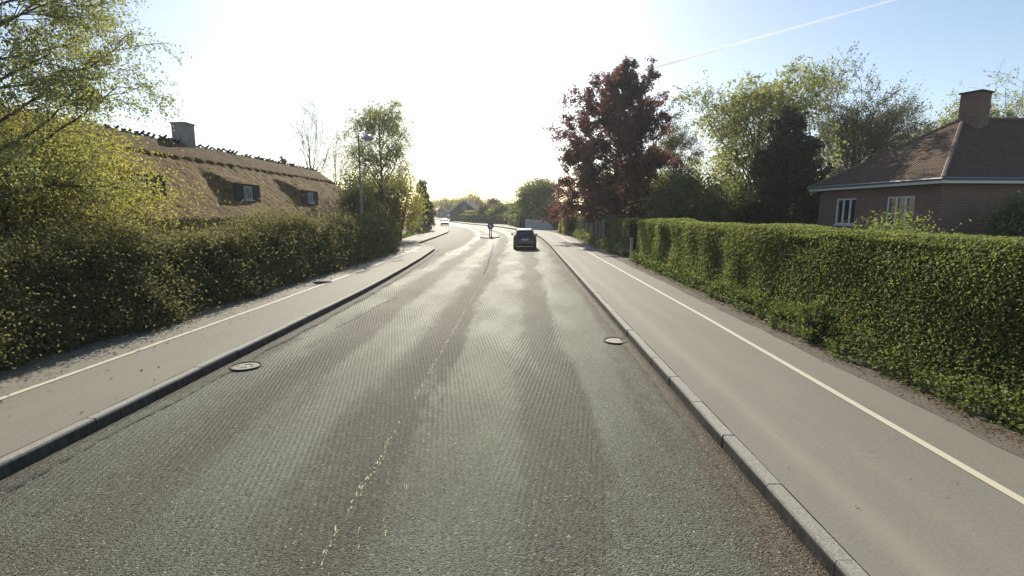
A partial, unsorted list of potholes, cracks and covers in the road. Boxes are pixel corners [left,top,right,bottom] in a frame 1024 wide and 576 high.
manhole cover [602,337,629,345]
manhole cover [229,361,264,372]
